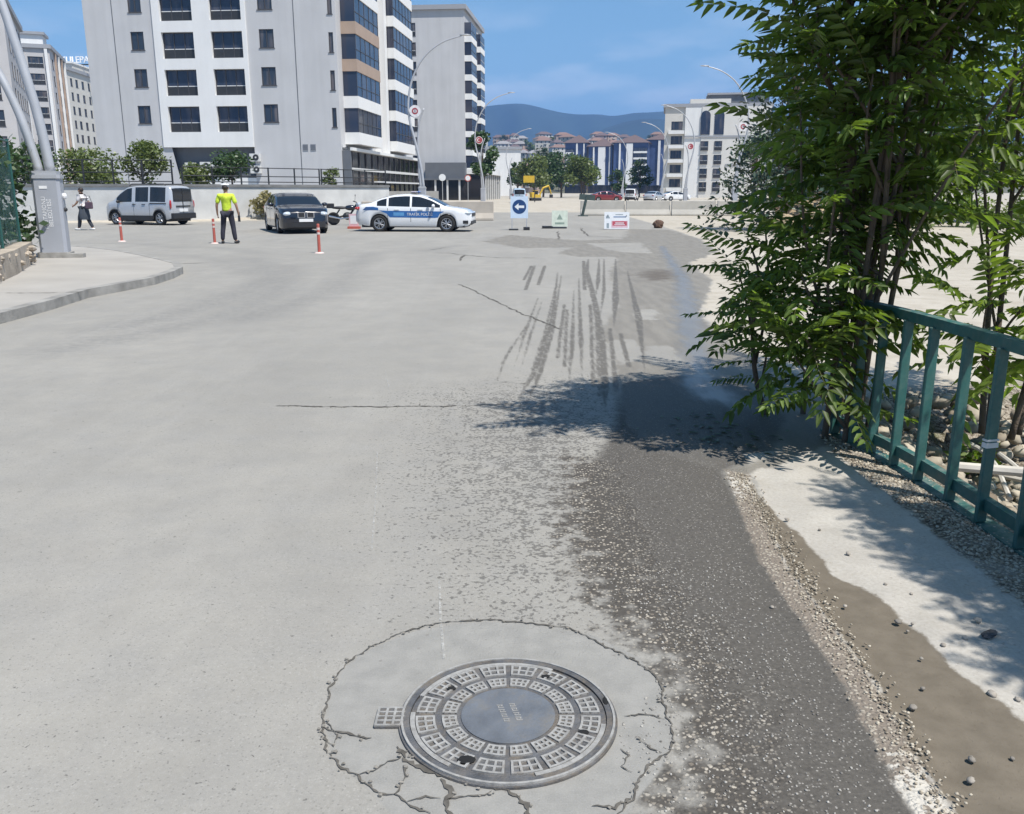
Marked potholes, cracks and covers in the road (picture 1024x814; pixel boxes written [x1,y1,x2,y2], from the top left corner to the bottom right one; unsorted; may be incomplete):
crack [458,284,560,329]
manhole cover [374,658,618,790]
